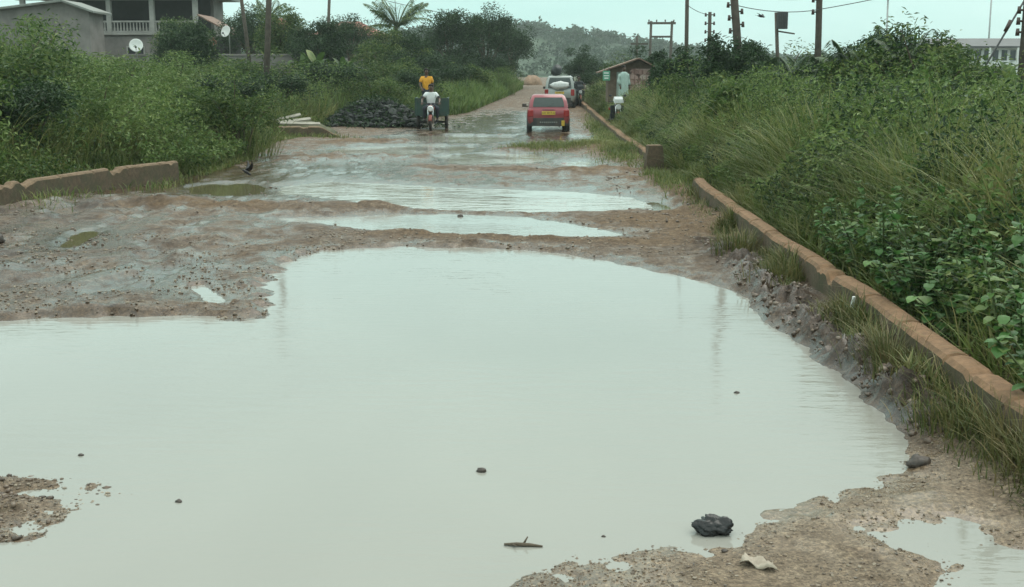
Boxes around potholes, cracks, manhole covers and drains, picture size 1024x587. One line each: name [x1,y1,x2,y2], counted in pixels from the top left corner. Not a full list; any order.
pothole [840,510,1024,587]
pothole [267,179,653,212]
pothole [0,239,939,587]
pothole [177,180,276,196]
pothole [264,208,650,237]
